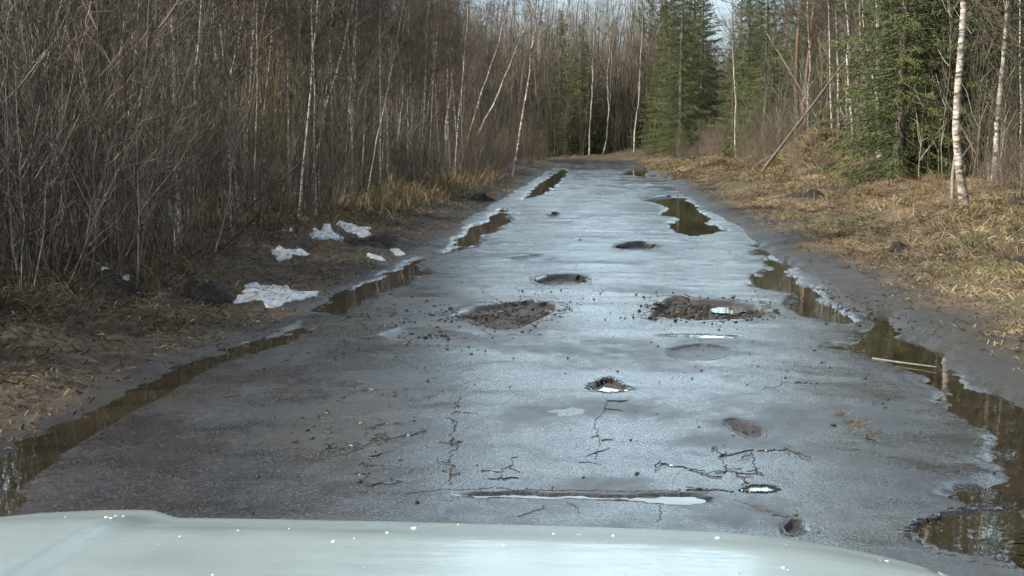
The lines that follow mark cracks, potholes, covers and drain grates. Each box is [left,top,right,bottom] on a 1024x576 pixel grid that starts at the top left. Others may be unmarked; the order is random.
pothole [659,342,739,362]
pothole [719,417,769,439]
pothole [529,273,591,286]
pothole [434,298,573,338]
pothole [624,291,788,325]
pothole [611,240,663,251]
pothole [782,518,805,535]
crack [654,445,811,521]
pothole [584,376,637,394]
